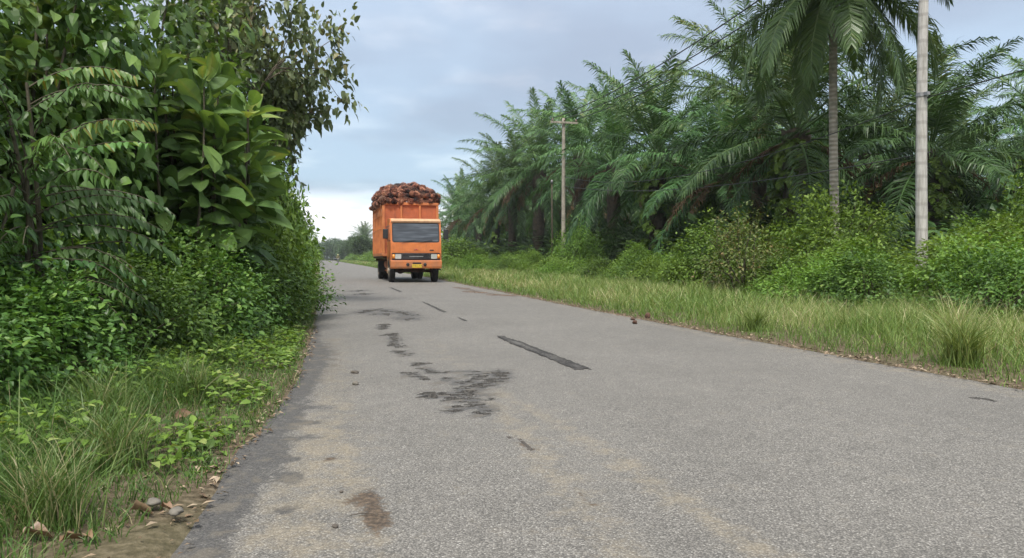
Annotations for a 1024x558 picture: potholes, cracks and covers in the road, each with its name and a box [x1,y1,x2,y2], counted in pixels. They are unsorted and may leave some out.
crack [506,436,533,451]
